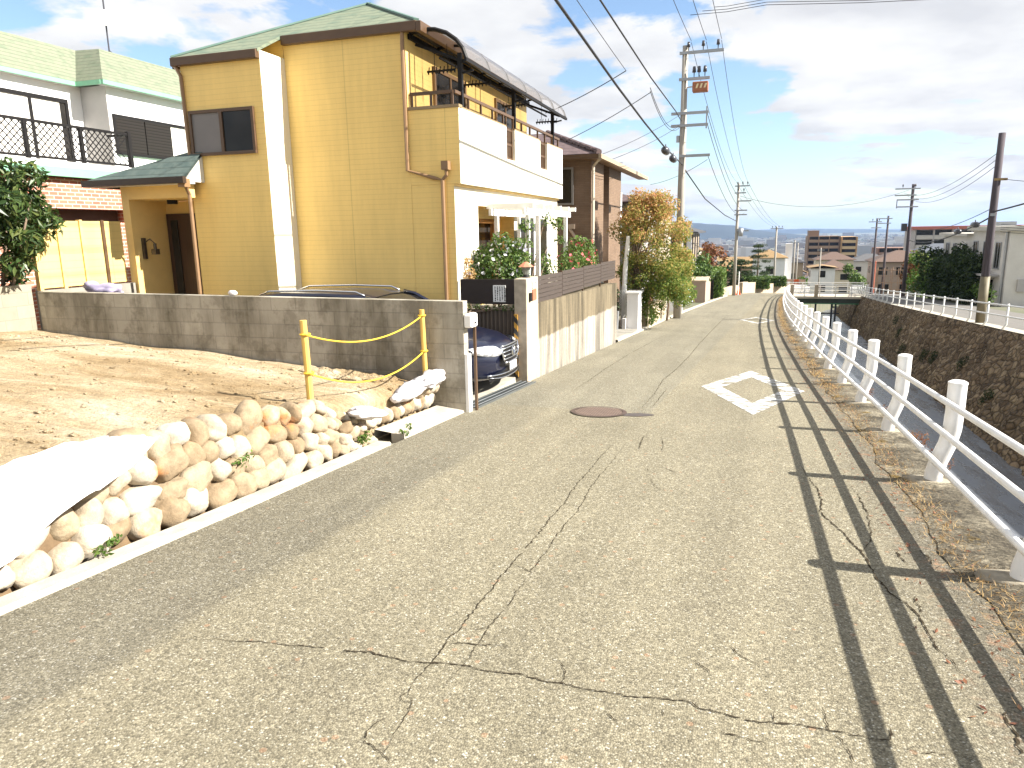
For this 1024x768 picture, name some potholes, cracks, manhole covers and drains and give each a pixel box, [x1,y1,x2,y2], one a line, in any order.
crack [187,449,975,763]
manhole cover [571,406,627,417]
